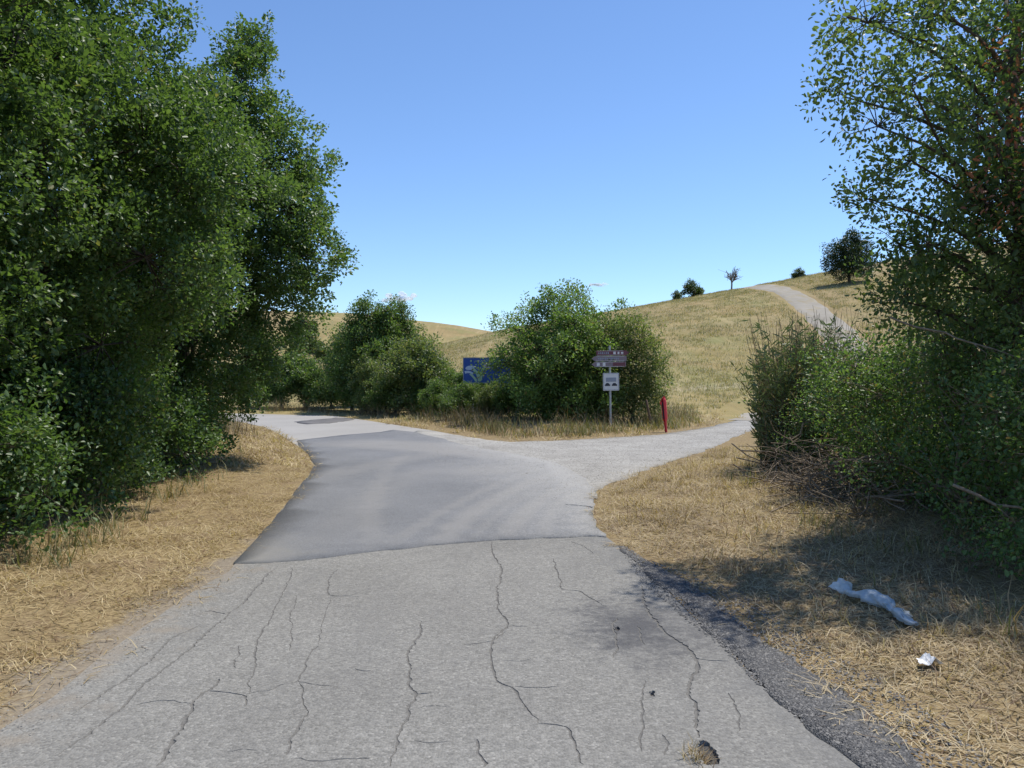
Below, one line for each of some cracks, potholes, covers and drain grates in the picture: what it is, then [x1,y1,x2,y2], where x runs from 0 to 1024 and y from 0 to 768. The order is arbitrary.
crack [464,542,584,765]
crack [58,566,370,766]
pothole [694,740,720,765]
crack [728,693,741,733]
crack [390,621,448,766]
crack [637,586,722,755]
crack [553,542,619,657]
